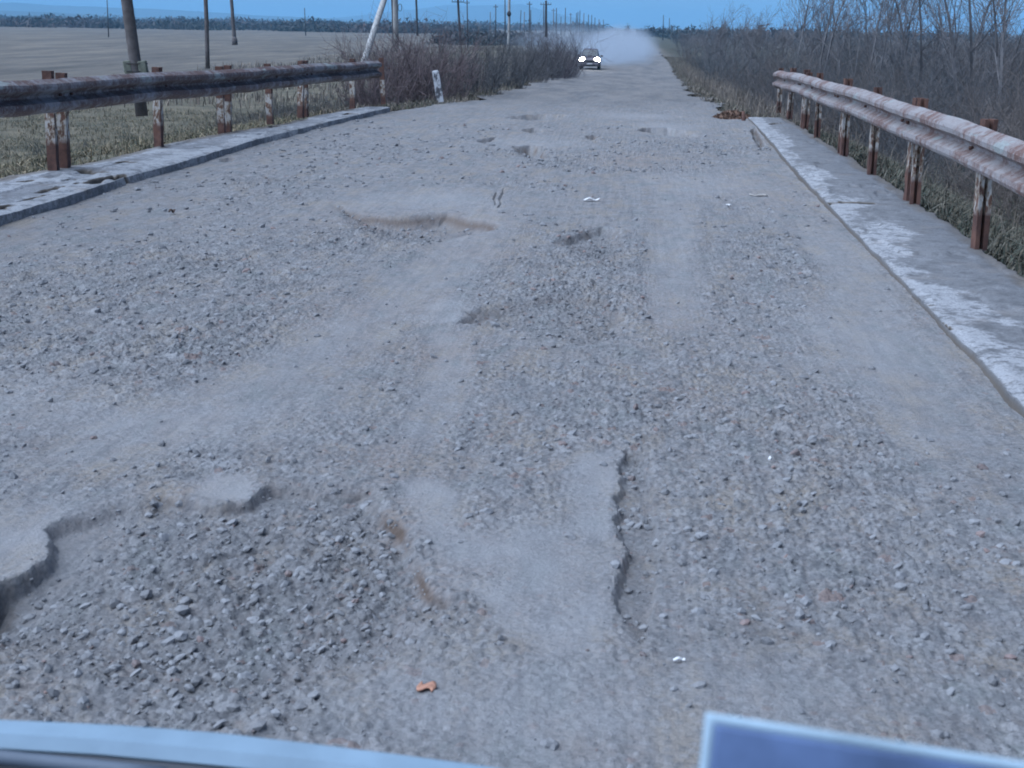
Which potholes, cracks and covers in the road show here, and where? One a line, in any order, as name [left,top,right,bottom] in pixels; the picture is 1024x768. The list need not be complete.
pothole [634,127,706,139]
pothole [510,145,560,164]
pothole [0,472,467,724]
pothole [323,201,506,247]
